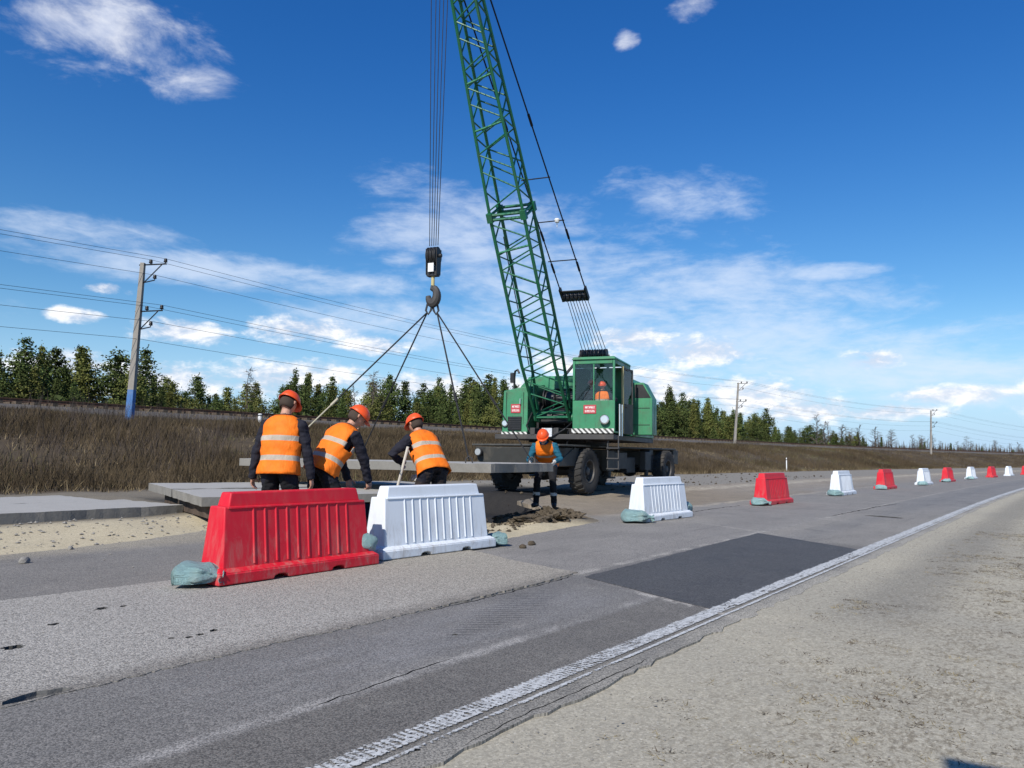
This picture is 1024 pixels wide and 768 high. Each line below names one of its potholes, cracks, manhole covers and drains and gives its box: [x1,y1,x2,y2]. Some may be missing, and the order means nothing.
crack [303,658,452,709]
pothole [2,687,72,705]
